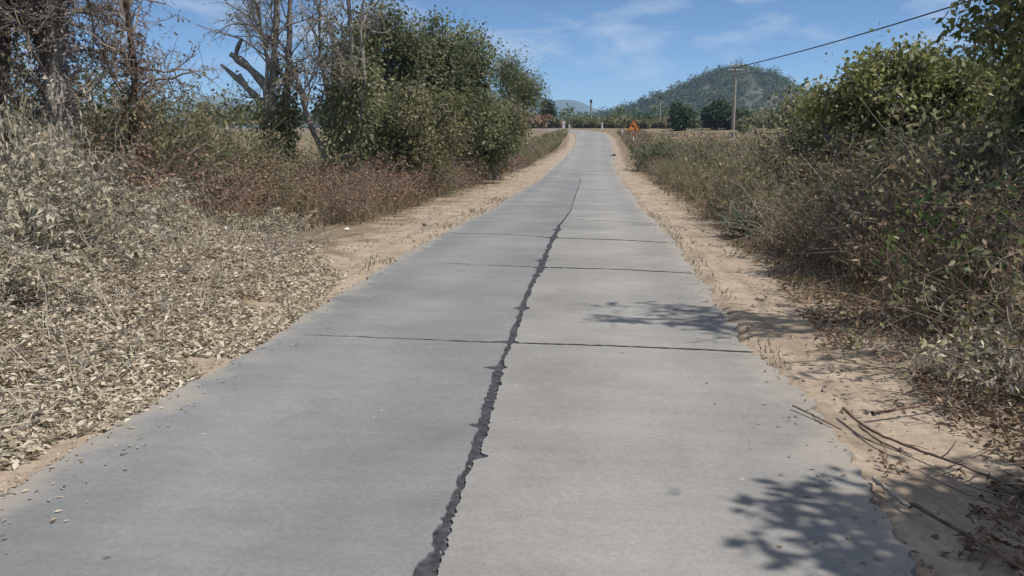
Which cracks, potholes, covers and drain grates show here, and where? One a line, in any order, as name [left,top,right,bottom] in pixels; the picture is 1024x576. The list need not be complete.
crack [413,179,581,576]
